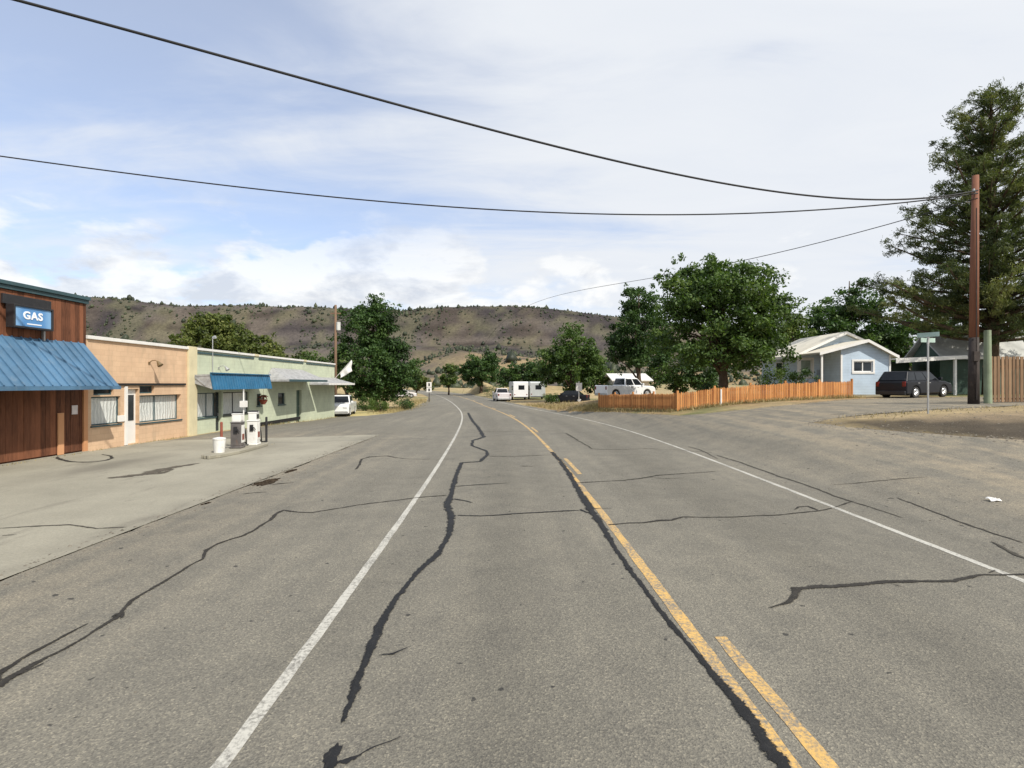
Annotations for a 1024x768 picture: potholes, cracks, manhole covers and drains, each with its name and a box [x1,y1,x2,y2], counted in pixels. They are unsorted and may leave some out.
crack [462,477,921,525]
crack [771,570,1024,607]
crack [0,482,444,687]
crack [579,471,712,483]
crack [55,454,198,478]
